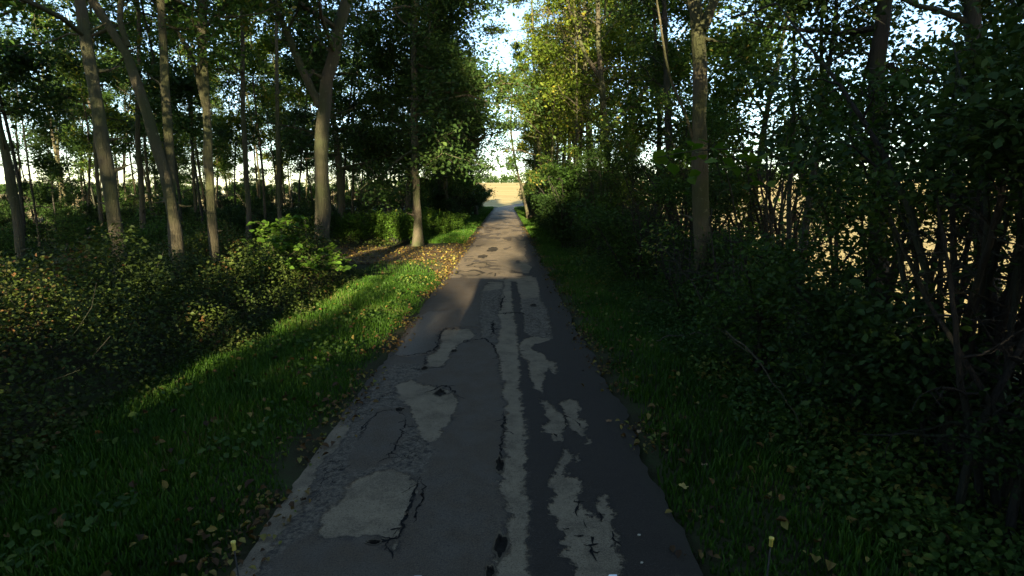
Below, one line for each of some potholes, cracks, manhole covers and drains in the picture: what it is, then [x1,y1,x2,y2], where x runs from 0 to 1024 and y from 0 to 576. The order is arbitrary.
crack [498,411,513,459]
pothole [492,530,510,562]
crack [563,500,622,561]
crack [379,476,427,559]
crack [349,391,426,461]
crack [390,258,551,399]
